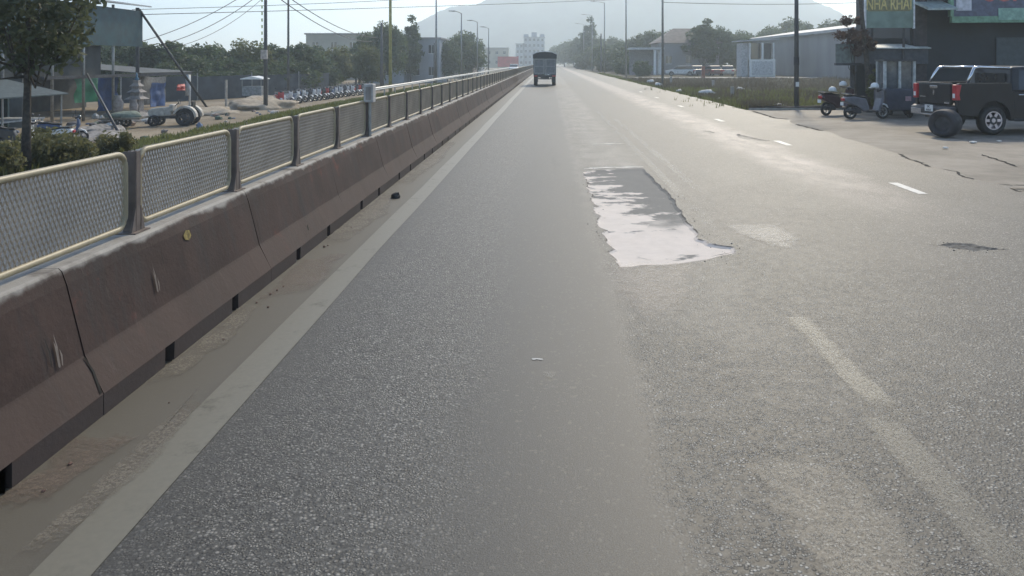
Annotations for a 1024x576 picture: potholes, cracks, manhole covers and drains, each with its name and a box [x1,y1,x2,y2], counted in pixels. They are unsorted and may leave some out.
pothole [941,243,997,251]
crack [751,111,824,131]
crack [899,154,973,179]
